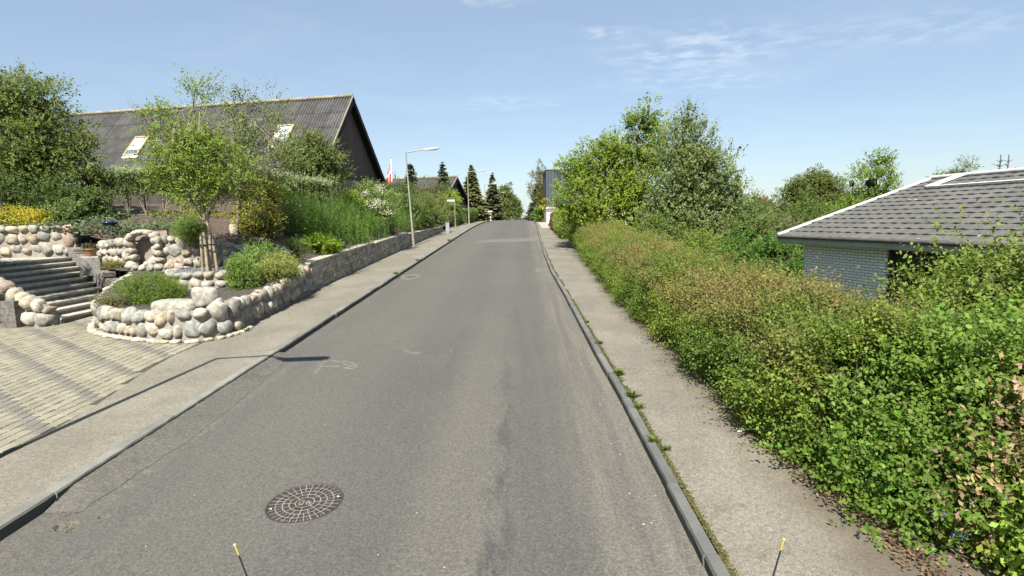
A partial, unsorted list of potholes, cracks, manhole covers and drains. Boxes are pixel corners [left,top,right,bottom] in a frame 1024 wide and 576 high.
pothole [52,519,83,532]
manhole cover [264,483,344,524]
